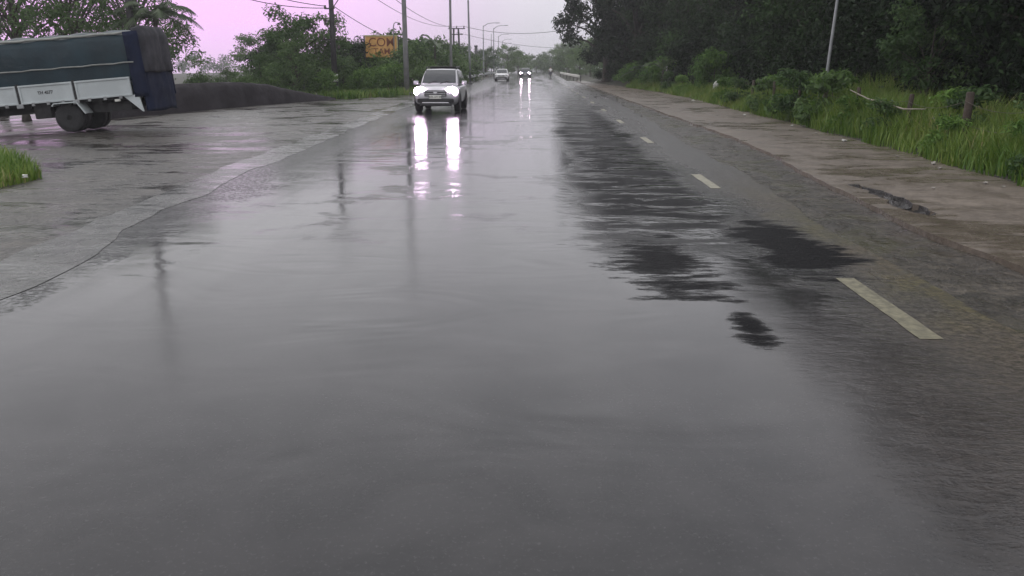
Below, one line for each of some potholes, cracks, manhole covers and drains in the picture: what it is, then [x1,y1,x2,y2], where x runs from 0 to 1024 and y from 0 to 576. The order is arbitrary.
pothole [848,184,936,215]
